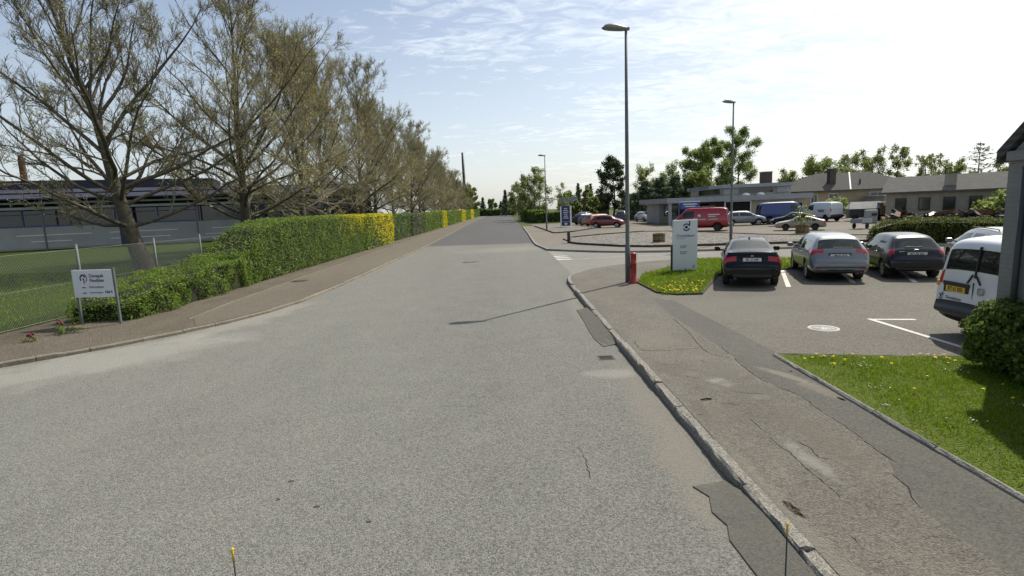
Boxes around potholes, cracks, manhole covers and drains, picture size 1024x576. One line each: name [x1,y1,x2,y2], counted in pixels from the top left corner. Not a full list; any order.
crack [667,320,921,508]
pothole [781,500,806,518]
